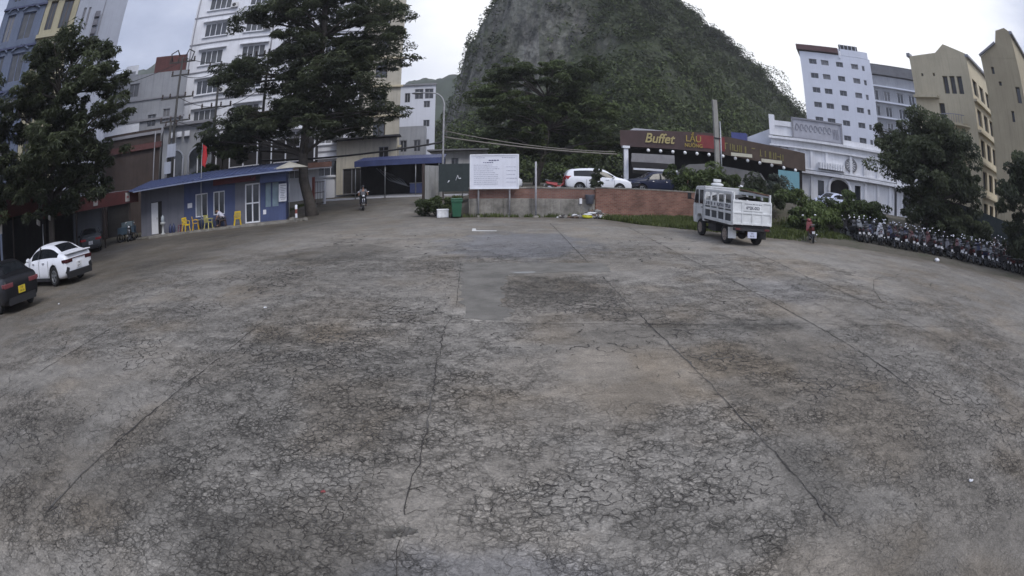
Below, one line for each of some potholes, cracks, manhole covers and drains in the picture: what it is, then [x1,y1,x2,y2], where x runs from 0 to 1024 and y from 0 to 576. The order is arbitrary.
crack [0,232,1024,576]
